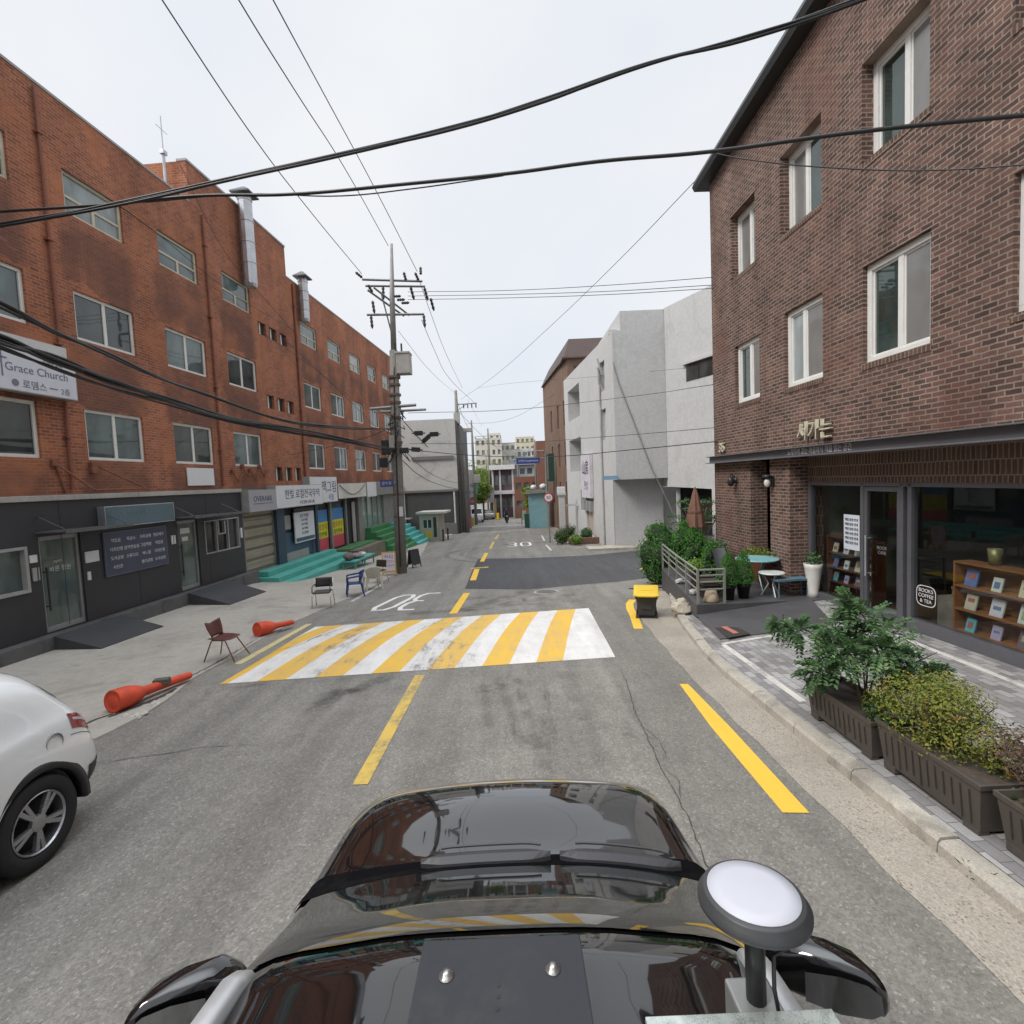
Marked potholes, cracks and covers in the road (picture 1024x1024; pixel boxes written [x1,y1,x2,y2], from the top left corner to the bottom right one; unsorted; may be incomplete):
crack [618,664,709,868]
